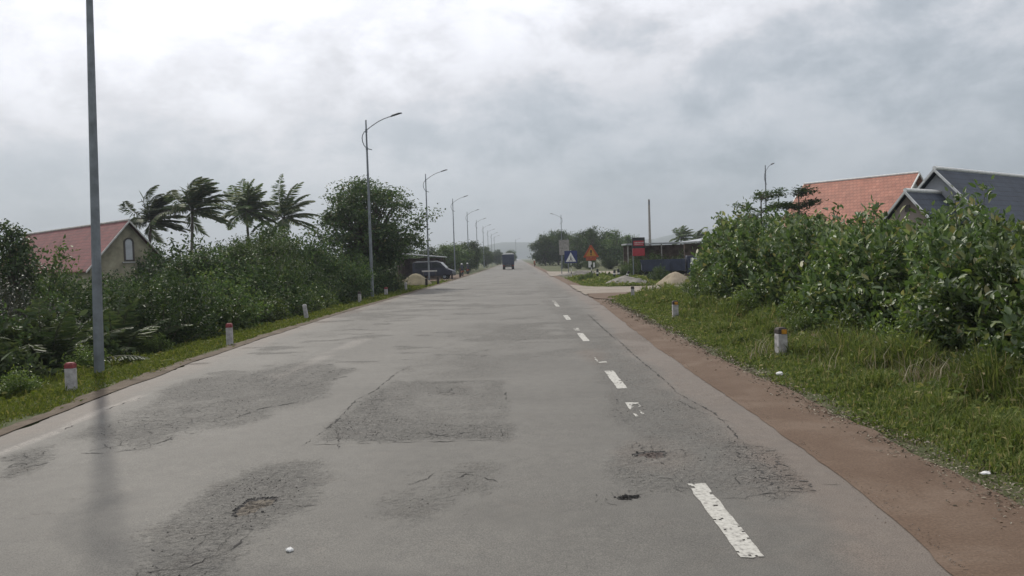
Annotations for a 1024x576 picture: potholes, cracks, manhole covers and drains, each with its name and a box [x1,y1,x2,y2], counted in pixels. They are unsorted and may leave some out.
crack [303,369,509,451]
pothole [231,494,278,517]
pothole [632,451,669,459]
